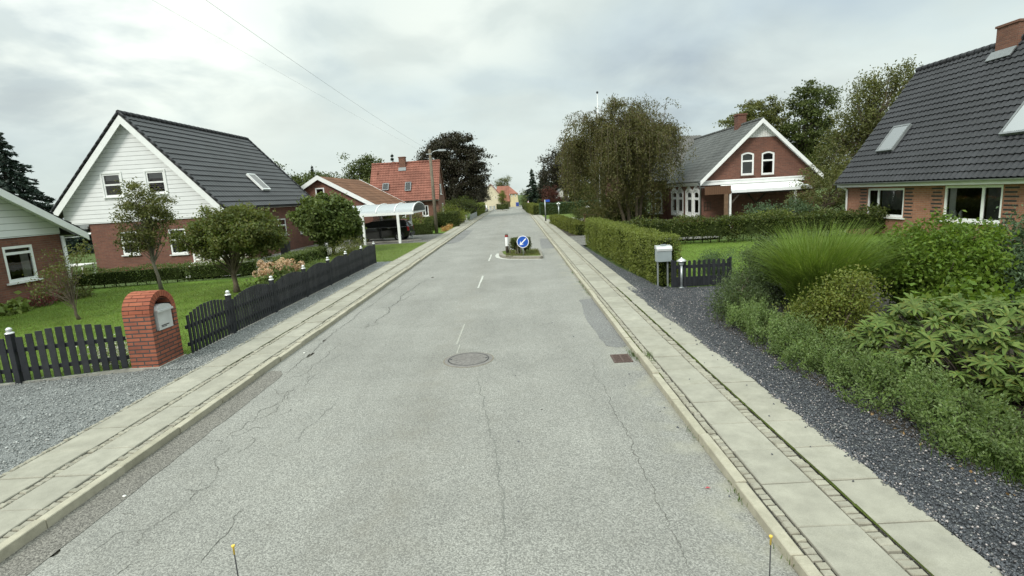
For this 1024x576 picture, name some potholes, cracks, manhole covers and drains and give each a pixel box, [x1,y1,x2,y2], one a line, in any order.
drain grate [610,354,633,363]
manhole cover [443,352,494,368]
crack [593,365,696,576]
crack [91,350,342,552]
